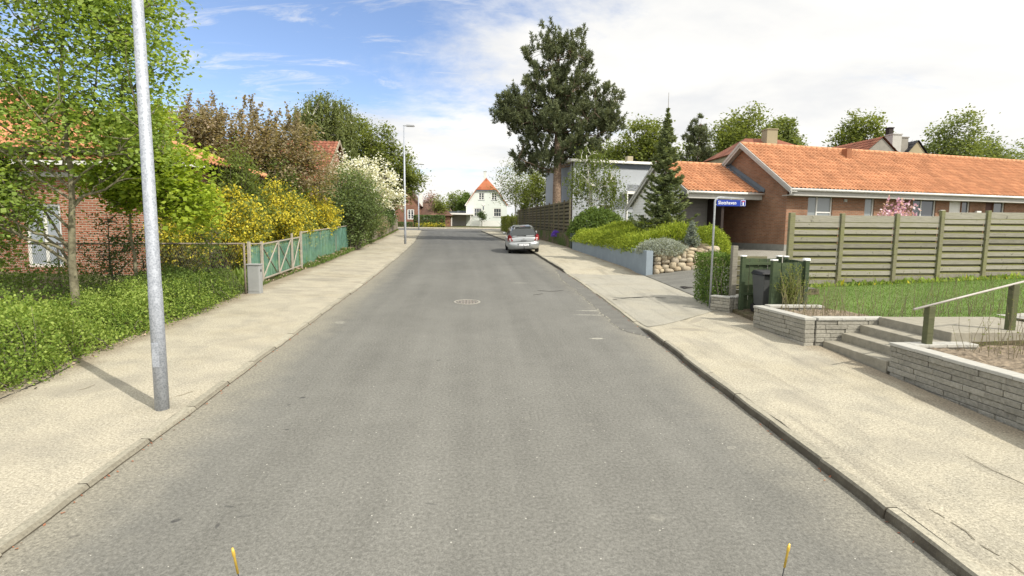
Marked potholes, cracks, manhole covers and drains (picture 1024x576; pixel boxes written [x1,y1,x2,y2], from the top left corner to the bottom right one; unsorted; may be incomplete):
crack [929,509,1024,574]
